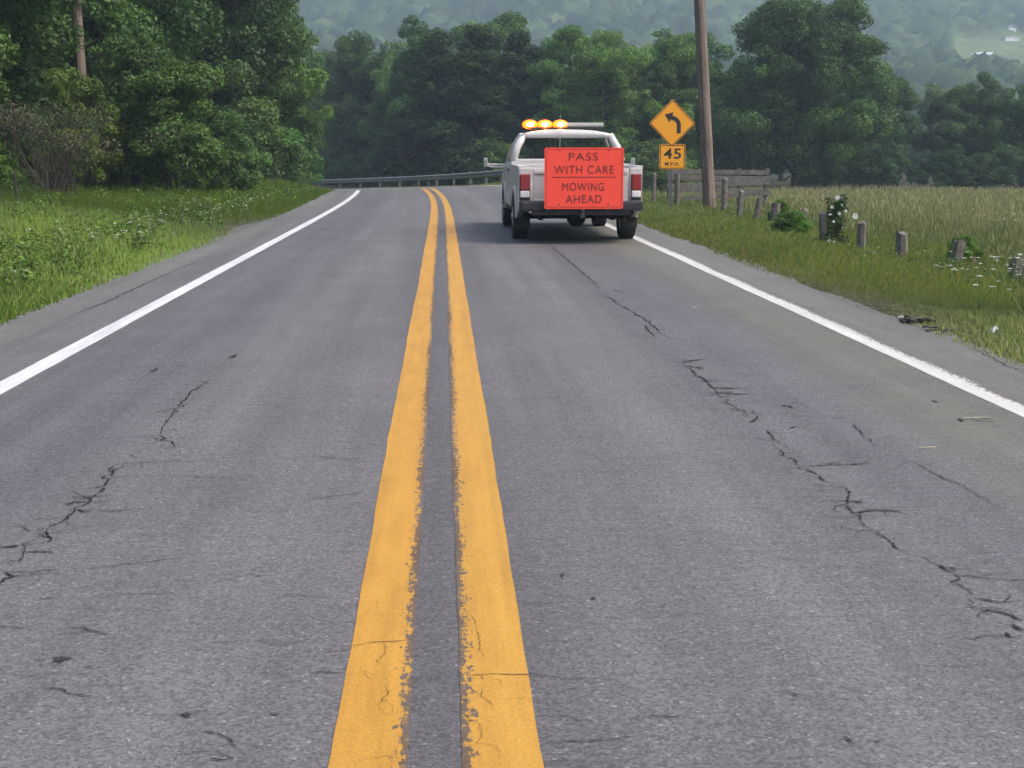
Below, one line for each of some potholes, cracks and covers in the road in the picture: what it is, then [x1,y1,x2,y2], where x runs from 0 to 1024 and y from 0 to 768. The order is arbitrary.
crack [317,638,419,676]
crack [672,358,1024,639]
crack [341,684,434,768]
crack [549,244,675,339]
crack [0,378,252,583]
